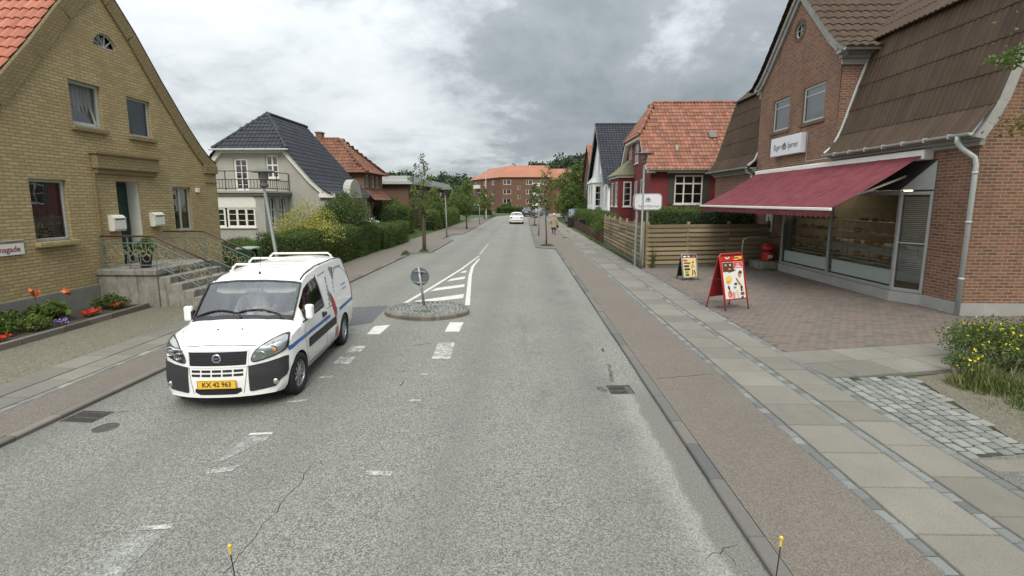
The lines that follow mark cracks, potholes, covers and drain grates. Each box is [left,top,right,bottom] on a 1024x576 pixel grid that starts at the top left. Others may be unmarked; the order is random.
drain grate [606,386,635,394]
drain grate [61,411,113,431]
crack [223,463,323,575]
manhole cover [91,423,120,433]
